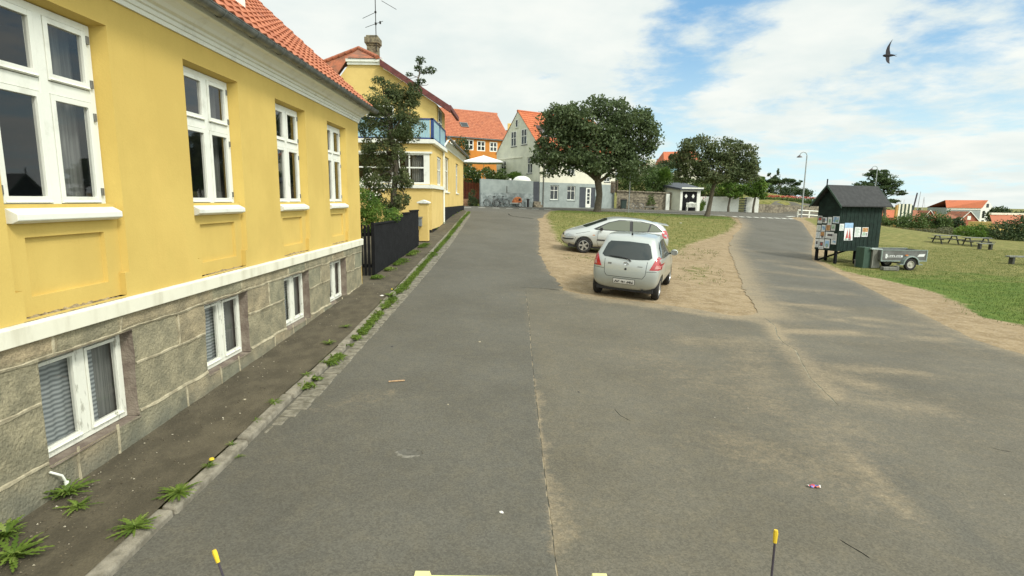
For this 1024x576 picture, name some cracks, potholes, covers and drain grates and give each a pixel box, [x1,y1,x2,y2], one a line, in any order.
crack [766,319,839,406]
